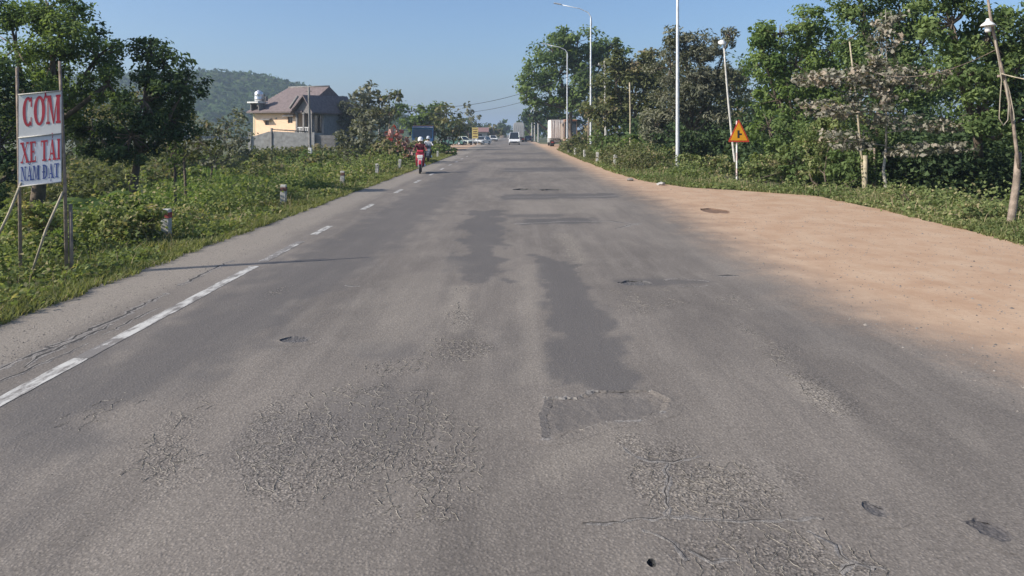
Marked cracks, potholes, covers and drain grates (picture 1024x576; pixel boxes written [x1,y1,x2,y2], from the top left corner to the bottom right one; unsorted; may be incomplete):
pothole [941,508,1024,555]
crack [582,444,890,576]
crack [119,400,215,482]
pothole [268,334,321,347]
pothole [611,279,659,287]
pothole [694,207,738,215]
crack [236,284,492,524]
